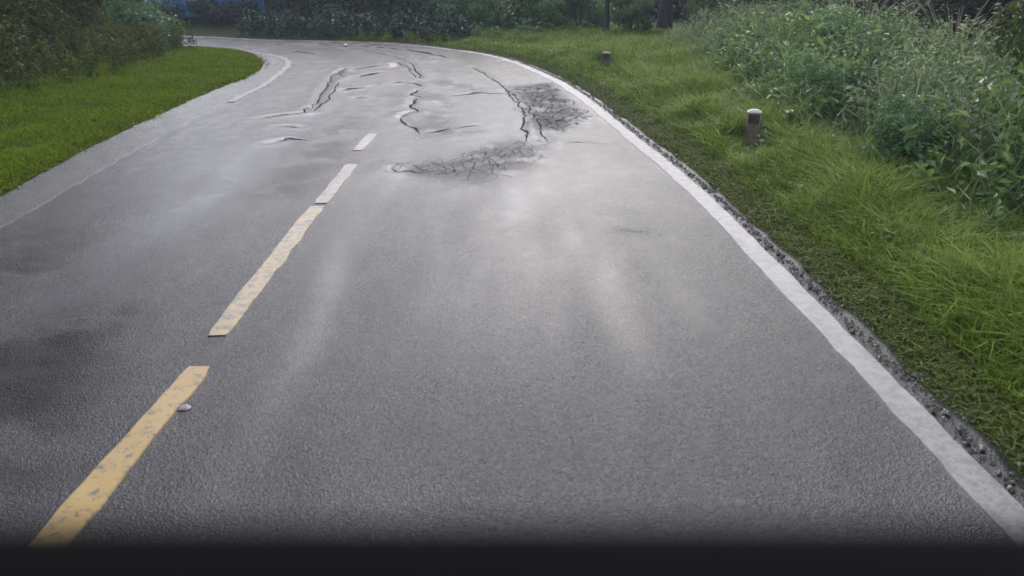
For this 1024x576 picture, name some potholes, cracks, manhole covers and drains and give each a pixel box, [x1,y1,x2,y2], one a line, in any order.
crack [390,68,589,179]
crack [259,44,475,143]
